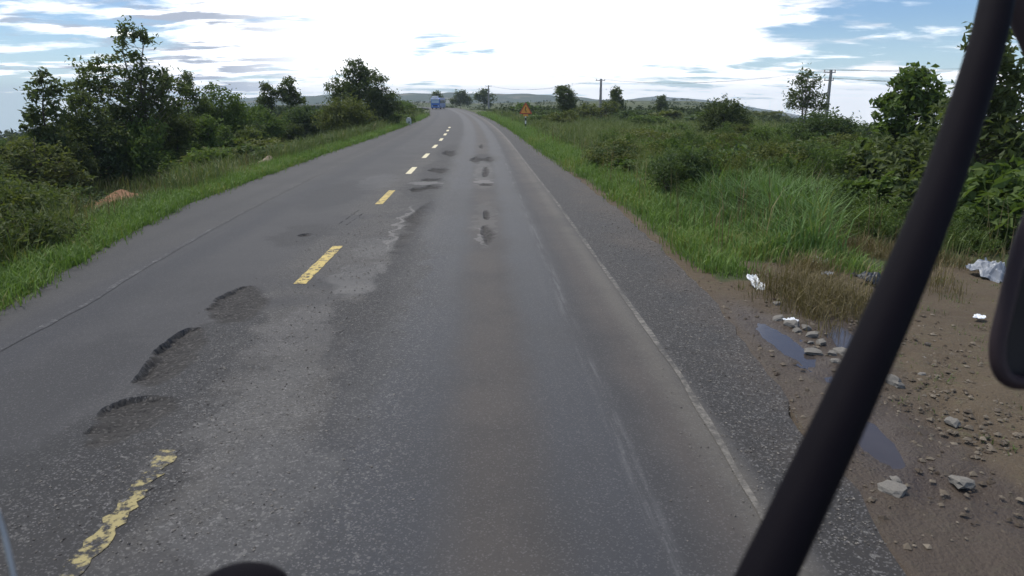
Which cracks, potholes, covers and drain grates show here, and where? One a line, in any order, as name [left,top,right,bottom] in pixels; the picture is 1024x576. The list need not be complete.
pothole [468,155,497,163]
pothole [480,224,500,246]
pothole [202,285,276,325]
pothole [129,327,215,390]
pothole [81,395,191,454]
crack [334,204,366,229]
